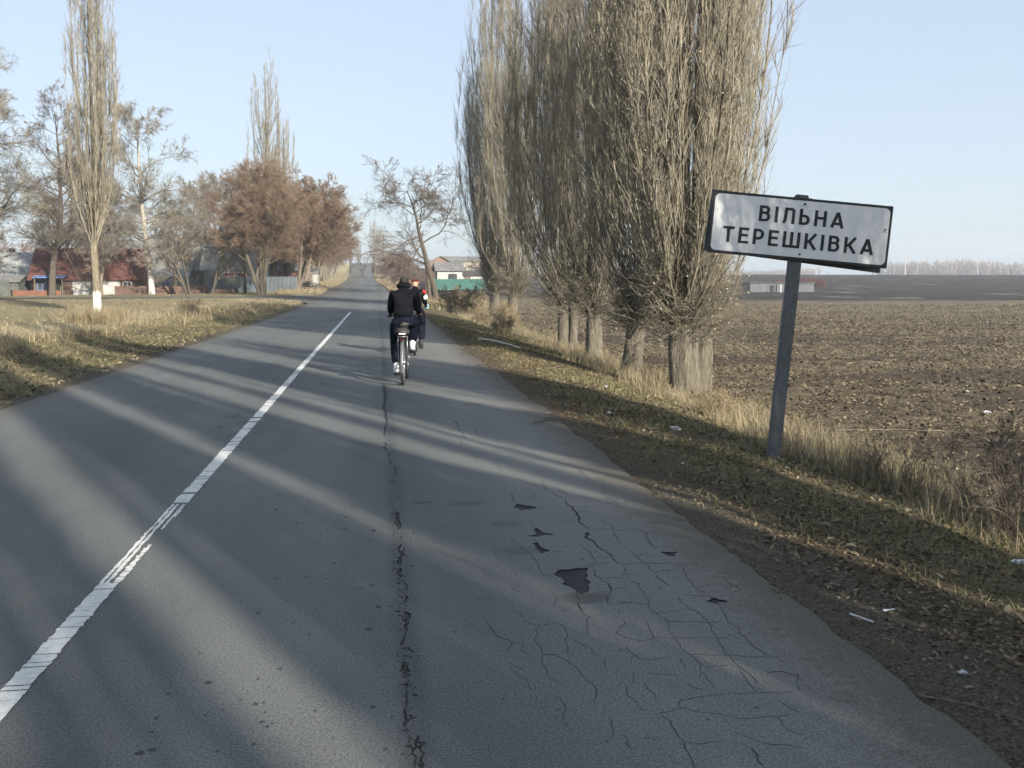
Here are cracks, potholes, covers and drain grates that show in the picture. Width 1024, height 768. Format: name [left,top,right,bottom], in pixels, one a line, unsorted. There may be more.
crack [381,342,426,768]
crack [466,462,825,768]
pothole [555,568,590,594]
